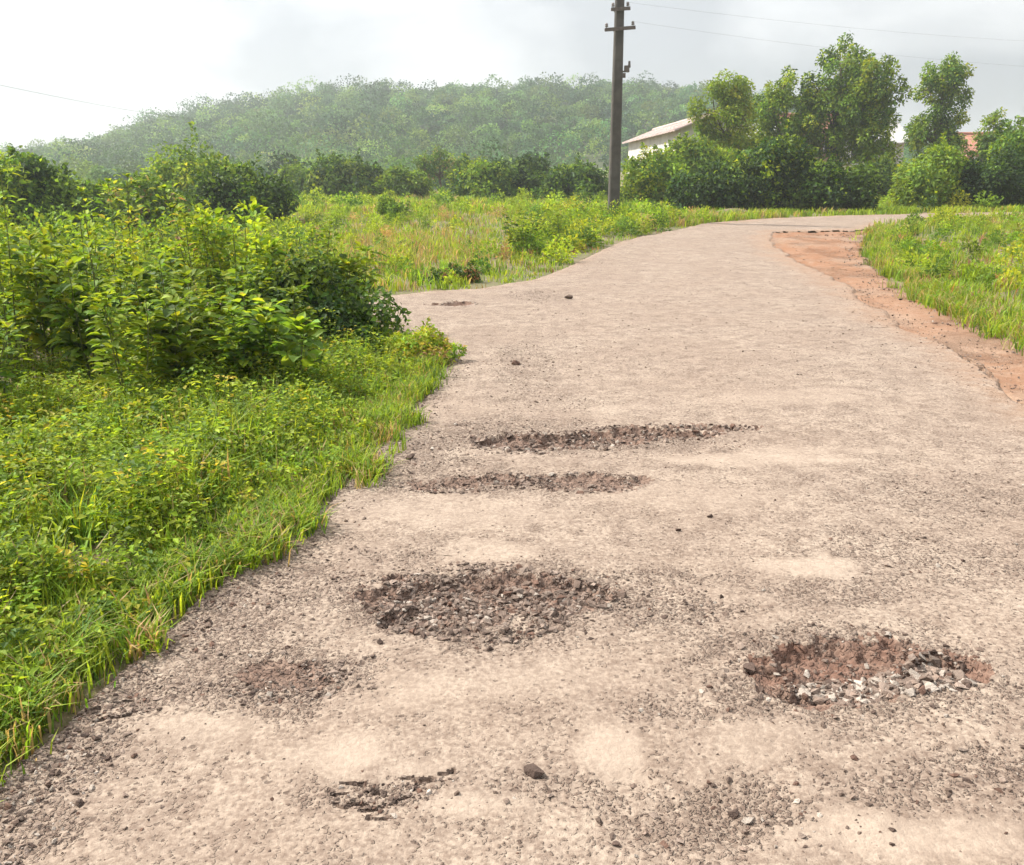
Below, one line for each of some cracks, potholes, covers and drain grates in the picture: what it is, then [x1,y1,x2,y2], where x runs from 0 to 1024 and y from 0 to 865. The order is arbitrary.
pothole [406,471,656,494]
pothole [743,632,997,712]
pothole [232,657,340,693]
pothole [467,422,764,454]
pothole [348,568,648,634]
